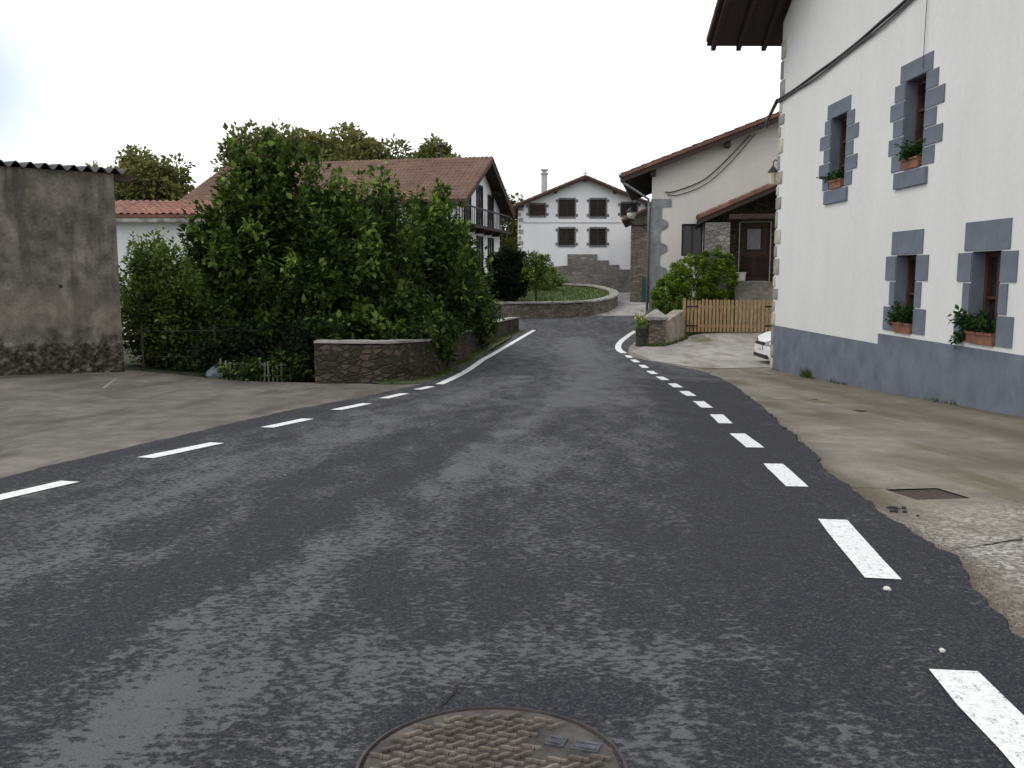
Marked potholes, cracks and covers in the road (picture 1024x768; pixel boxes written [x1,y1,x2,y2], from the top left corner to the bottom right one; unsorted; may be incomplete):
manhole cover [355,706,628,768]
crack [440,682,460,706]
crack [949,539,1022,551]
